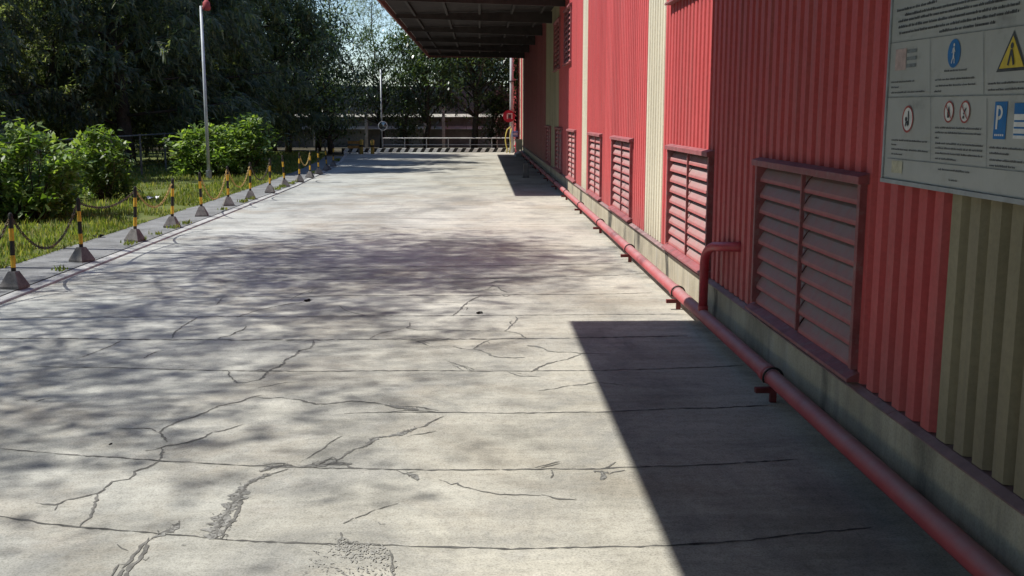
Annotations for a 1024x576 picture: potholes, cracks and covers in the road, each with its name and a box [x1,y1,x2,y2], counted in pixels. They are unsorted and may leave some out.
crack [218,288,362,339]
crack [370,278,622,391]
crack [40,340,444,576]
crack [397,461,624,500]
